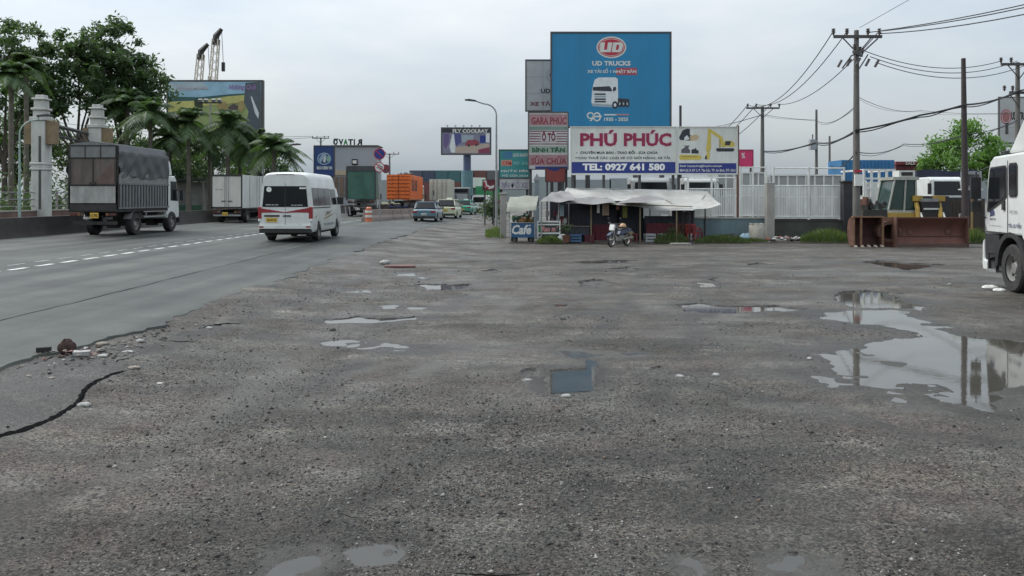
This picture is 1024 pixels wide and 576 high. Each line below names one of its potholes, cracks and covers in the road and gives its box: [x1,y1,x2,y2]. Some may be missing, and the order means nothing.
pothole [520,368,541,376]
pothole [577,279,615,287]
pothole [833,290,929,312]
pothole [676,302,809,311]
crack [0,356,129,438]
